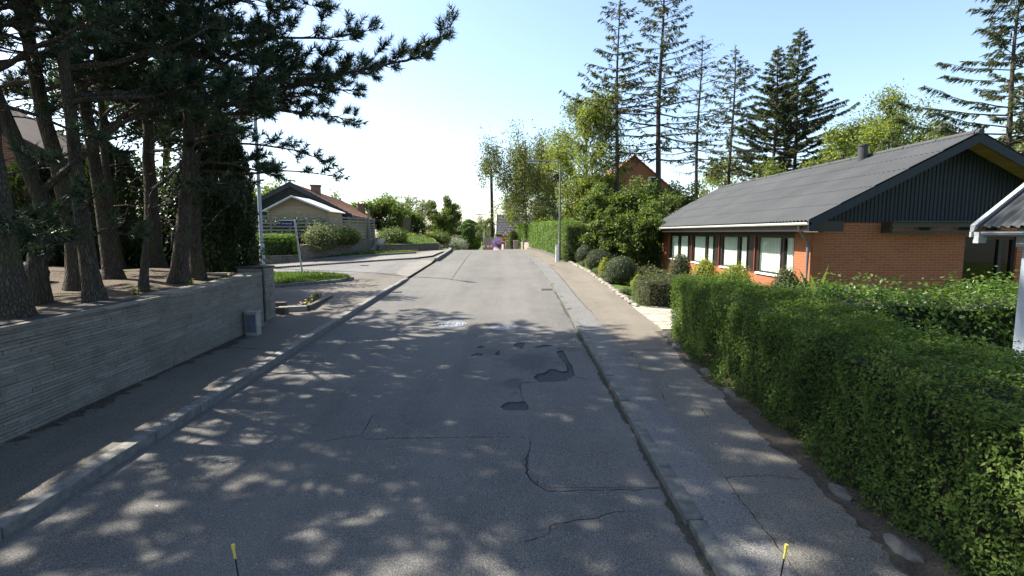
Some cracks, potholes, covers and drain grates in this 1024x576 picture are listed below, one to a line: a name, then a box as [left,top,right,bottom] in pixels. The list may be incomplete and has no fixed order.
pothole [501,401,529,411]
crack [320,416,659,492]
pothole [534,350,575,382]
crack [523,510,639,543]
